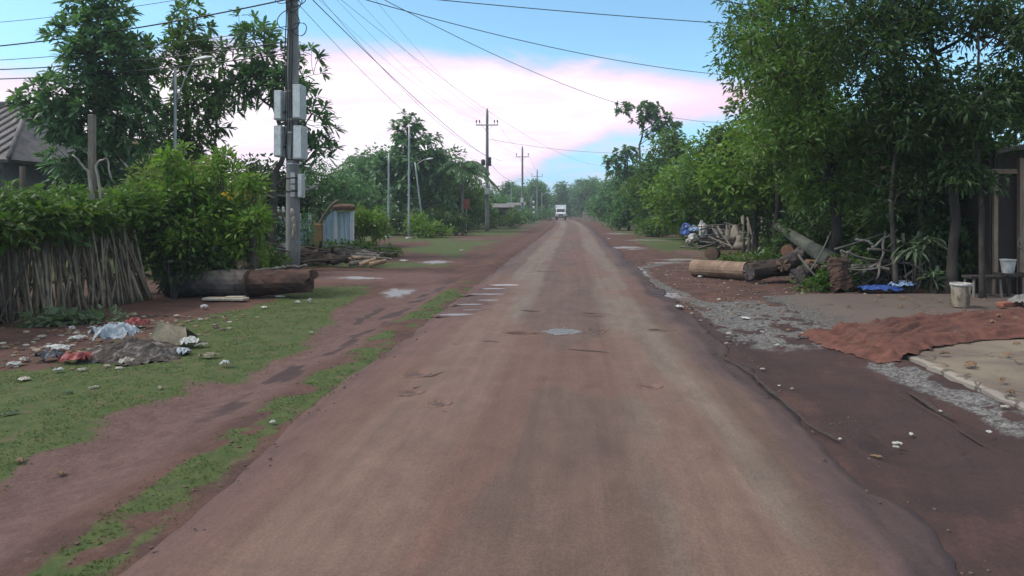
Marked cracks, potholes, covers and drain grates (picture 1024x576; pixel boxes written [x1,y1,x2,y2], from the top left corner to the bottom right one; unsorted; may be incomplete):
pothole [425,399,453,408]
pothole [633,382,664,390]
crack [906,391,955,418]
pothole [398,370,432,378]
